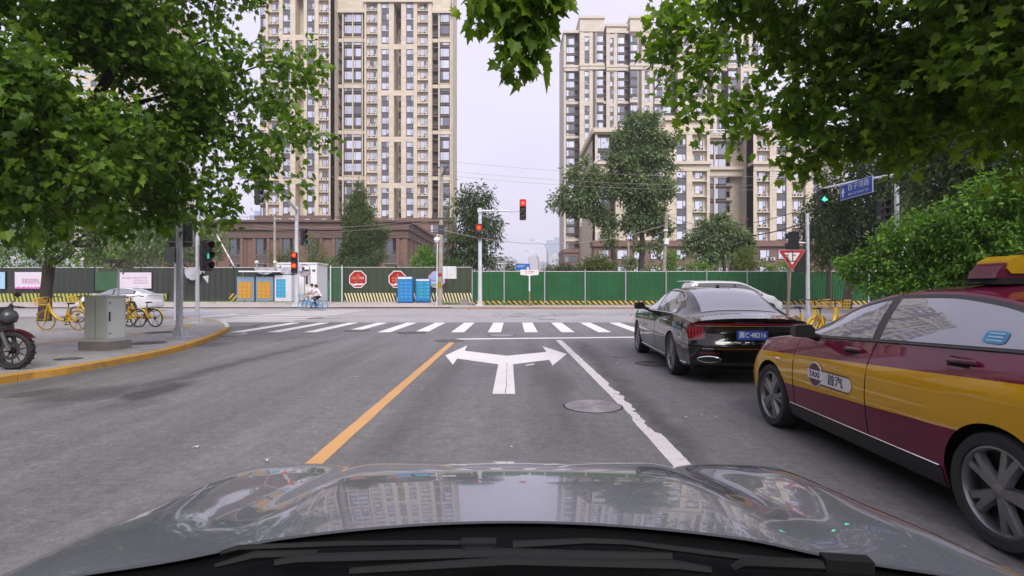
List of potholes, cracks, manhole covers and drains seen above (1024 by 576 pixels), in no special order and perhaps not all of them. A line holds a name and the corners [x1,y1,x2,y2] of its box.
manhole cover [563,400,623,413]
